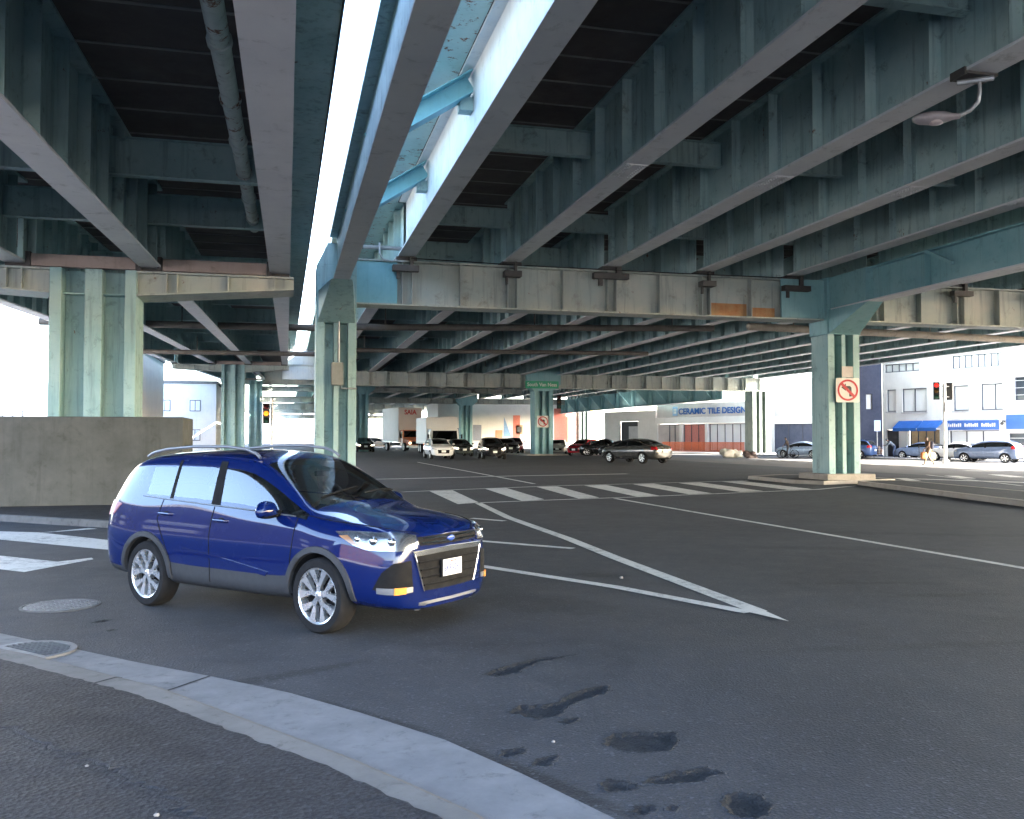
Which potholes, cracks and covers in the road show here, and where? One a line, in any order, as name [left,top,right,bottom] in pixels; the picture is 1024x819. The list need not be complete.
pothole [496,746,528,758]
pothole [529,754,560,768]
pothole [556,717,581,725]
pothole [482,654,578,677]
pothole [600,731,679,754]
manhole cover [19,598,101,613]
pothole [717,791,775,819]
pothole [506,685,612,721]
pothole [597,778,643,794]
pothole [640,766,727,786]
drain grate [0,640,77,659]
